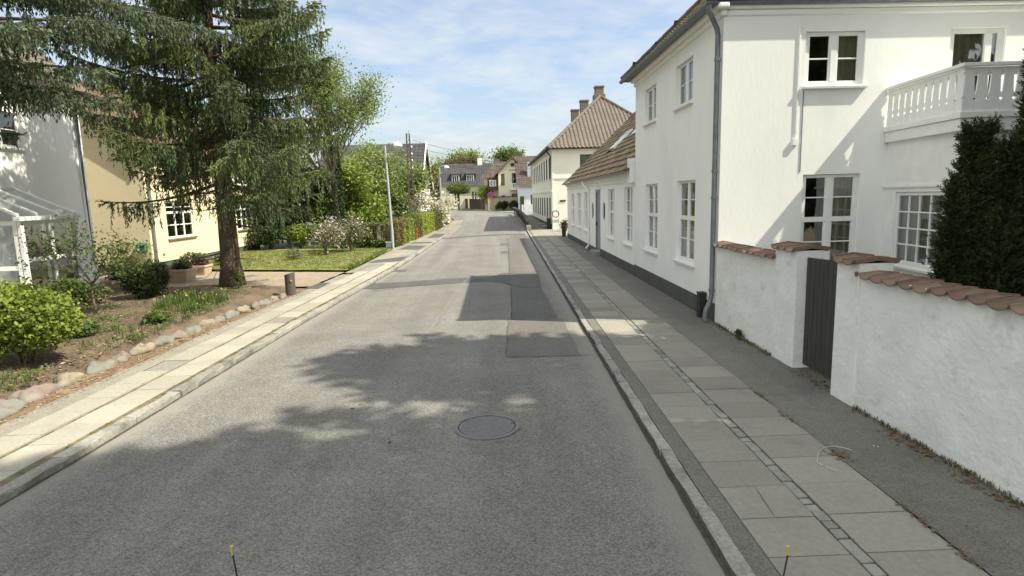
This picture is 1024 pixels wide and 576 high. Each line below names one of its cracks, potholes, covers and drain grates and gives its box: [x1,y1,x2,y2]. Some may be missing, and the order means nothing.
manhole cover [454,414,520,440]
